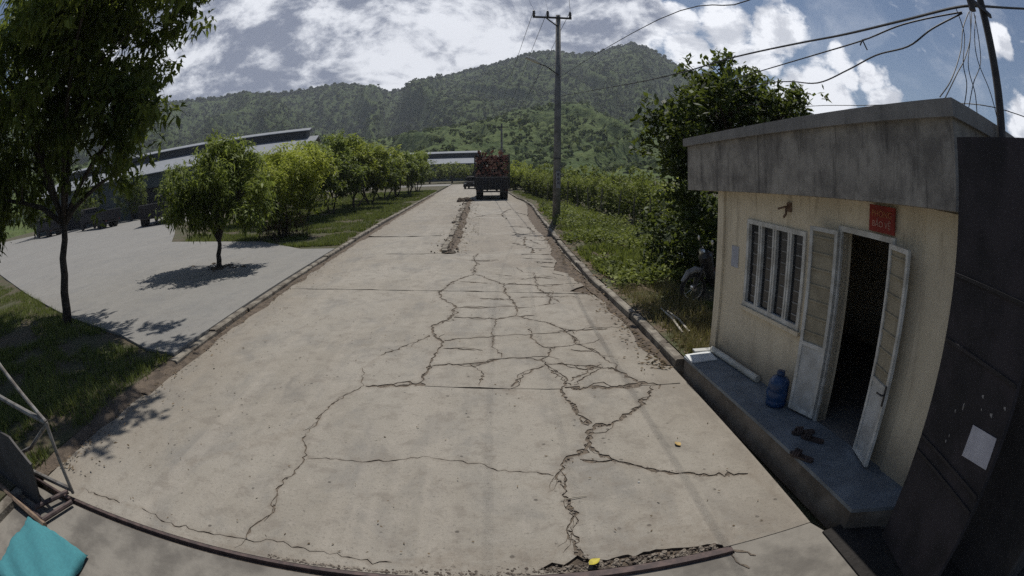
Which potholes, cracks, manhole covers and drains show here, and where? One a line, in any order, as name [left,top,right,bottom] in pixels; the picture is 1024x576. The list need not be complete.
pothole [540,544,724,574]
crack [86,209,748,565]
crack [731,550,755,568]
